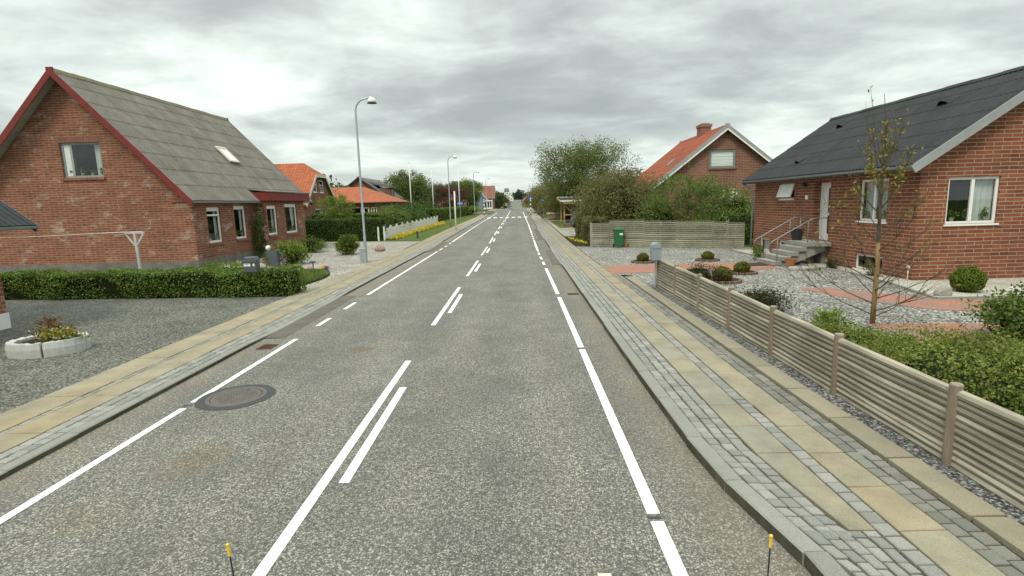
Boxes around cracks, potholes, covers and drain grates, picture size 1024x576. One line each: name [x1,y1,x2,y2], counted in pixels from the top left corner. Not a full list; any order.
manhole cover [194,384,276,410]
